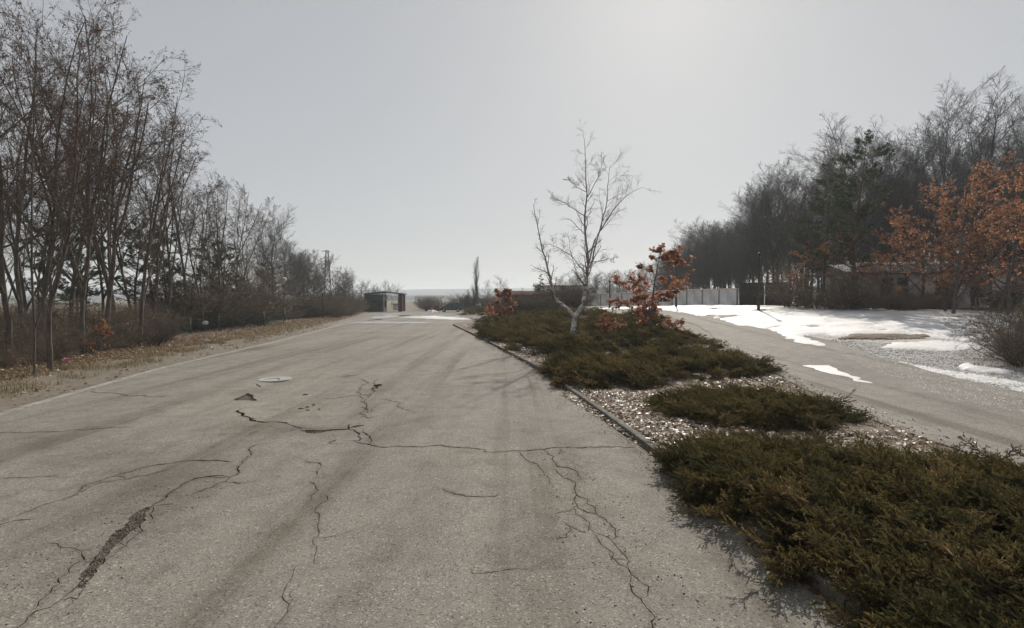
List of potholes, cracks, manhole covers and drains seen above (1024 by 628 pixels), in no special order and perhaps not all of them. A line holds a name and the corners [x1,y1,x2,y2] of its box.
crack [235,375,656,628]
crack [0,444,259,628]
